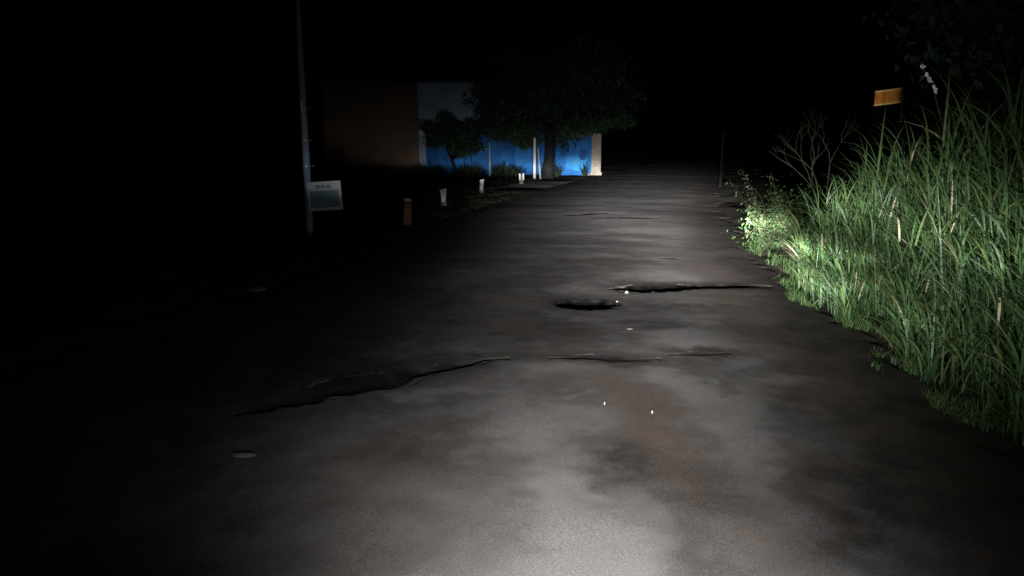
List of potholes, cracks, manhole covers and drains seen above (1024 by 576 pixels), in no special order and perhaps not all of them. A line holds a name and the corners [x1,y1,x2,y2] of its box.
pothole [548,299,625,312]
crack [552,349,729,365]
